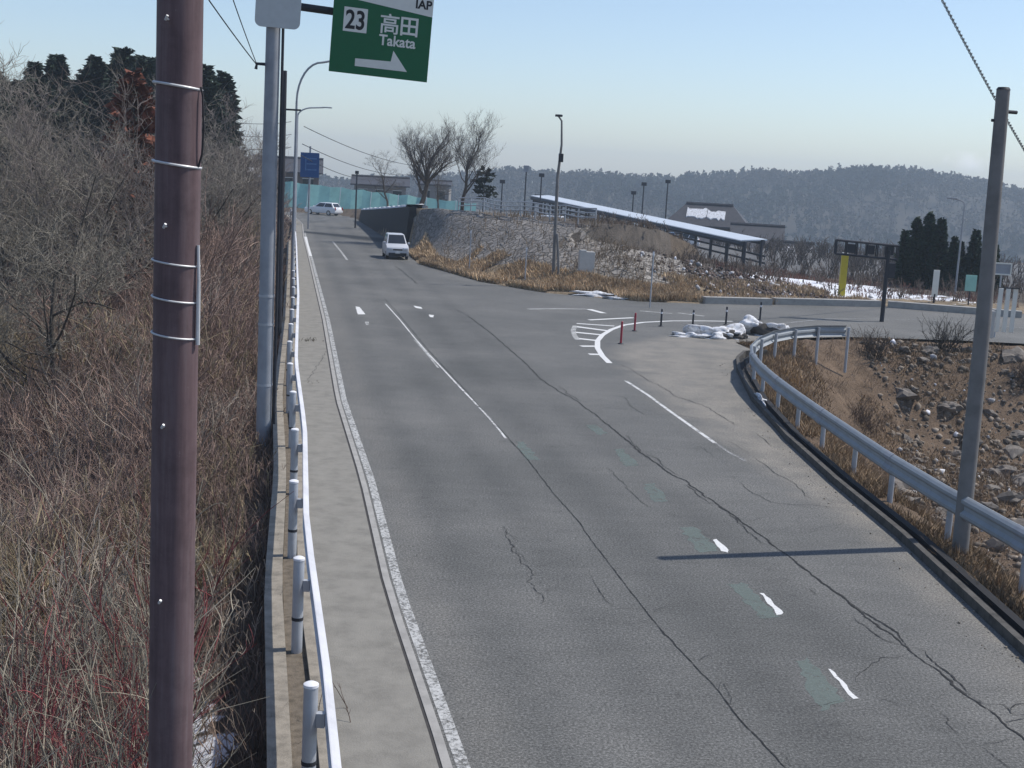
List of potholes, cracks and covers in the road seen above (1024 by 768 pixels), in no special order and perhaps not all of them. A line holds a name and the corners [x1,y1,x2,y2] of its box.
crack [447,309,1024,768]
